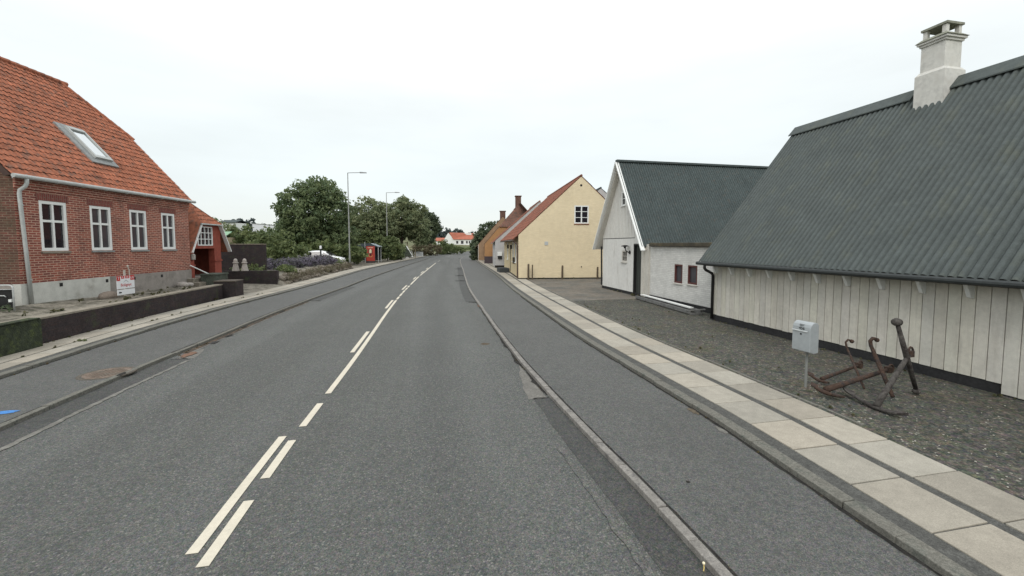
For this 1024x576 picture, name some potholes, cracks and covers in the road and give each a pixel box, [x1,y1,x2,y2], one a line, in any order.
manhole cover [75,367,137,380]
